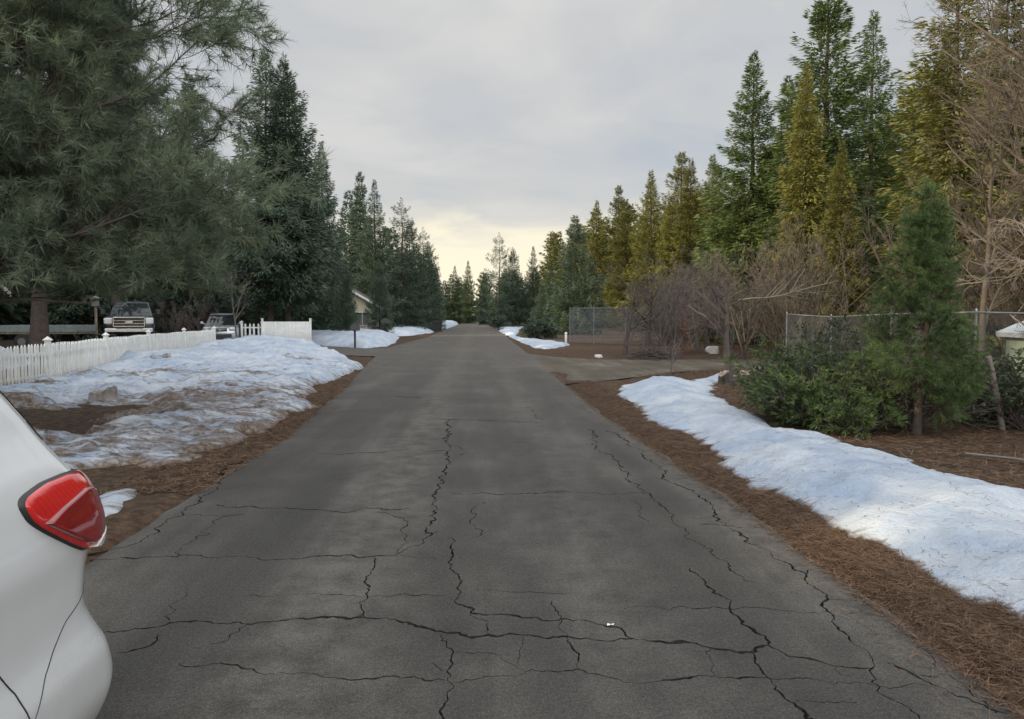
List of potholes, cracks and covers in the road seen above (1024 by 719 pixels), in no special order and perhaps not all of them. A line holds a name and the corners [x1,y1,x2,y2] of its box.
crack [88,408,1013,719]
